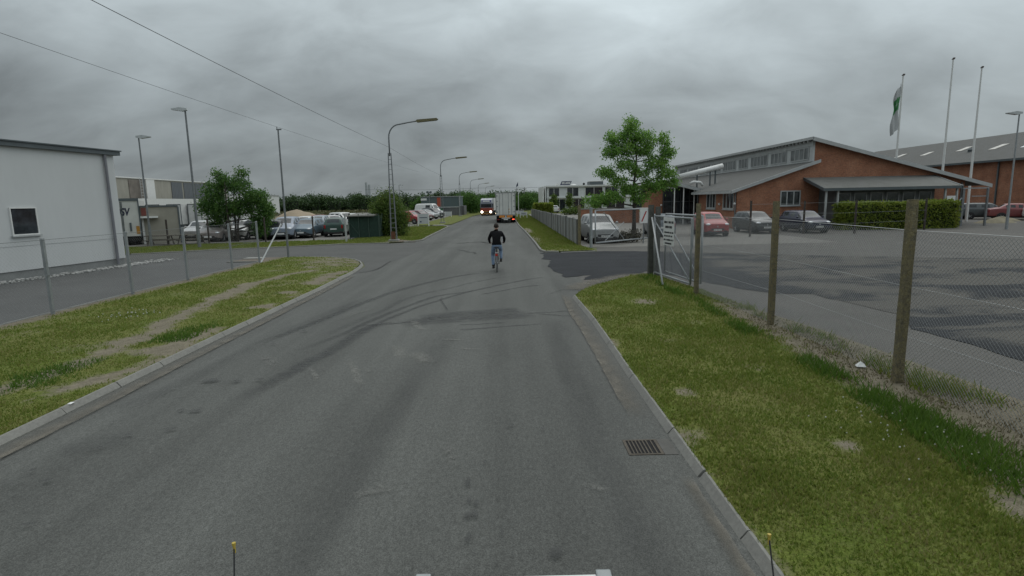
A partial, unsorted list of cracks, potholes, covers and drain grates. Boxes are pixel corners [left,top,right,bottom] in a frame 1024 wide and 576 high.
drain grate [622,439,679,456]
